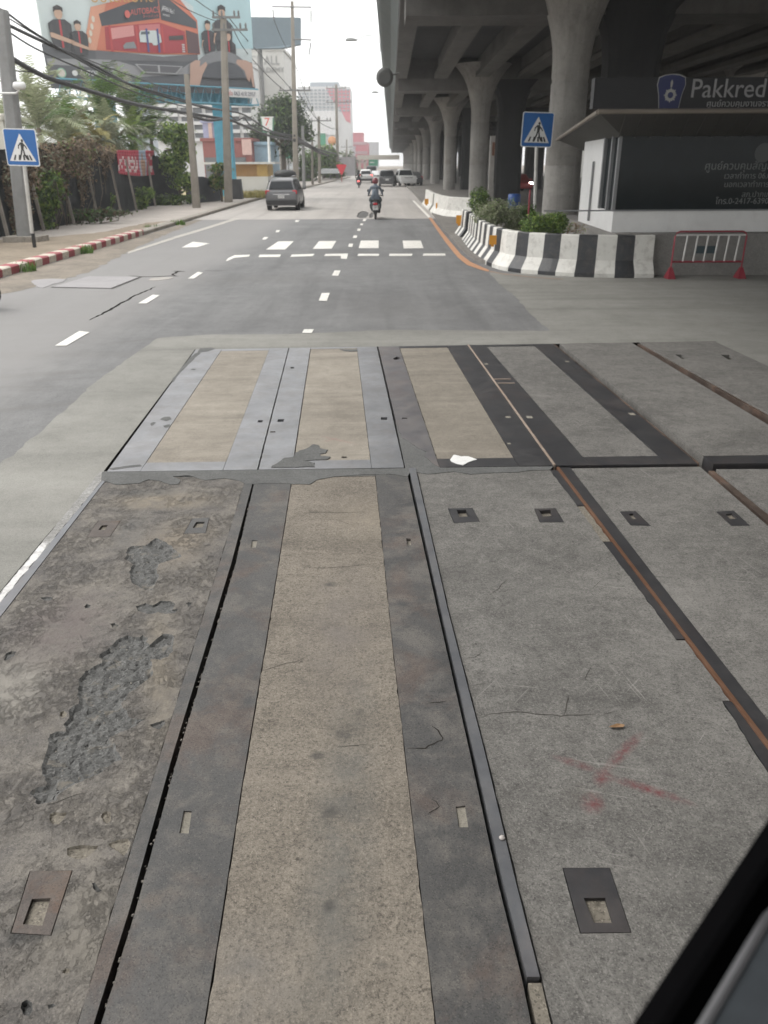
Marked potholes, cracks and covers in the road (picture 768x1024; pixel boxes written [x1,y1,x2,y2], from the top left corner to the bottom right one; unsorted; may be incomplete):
crack [90,271,185,320]
crack [483,695,611,717]
pothole [125,538,181,590]
pothole [30,633,174,804]
